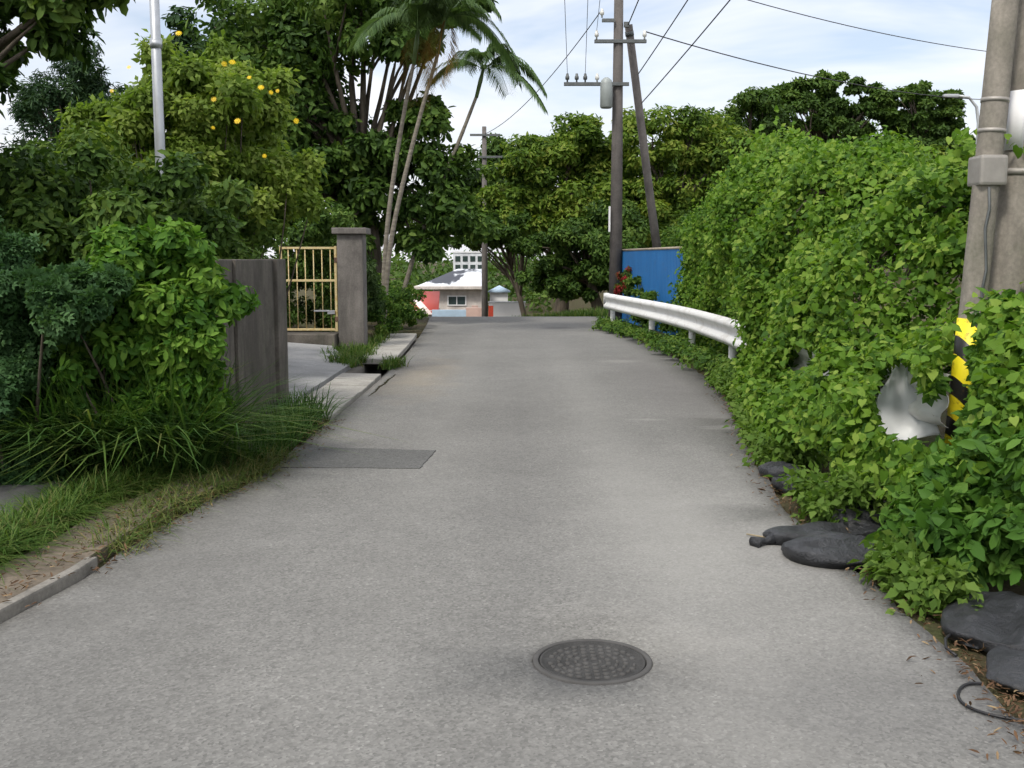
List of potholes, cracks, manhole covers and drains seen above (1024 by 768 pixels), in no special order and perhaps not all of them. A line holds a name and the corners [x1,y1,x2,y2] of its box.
manhole cover [533,639,652,685]
